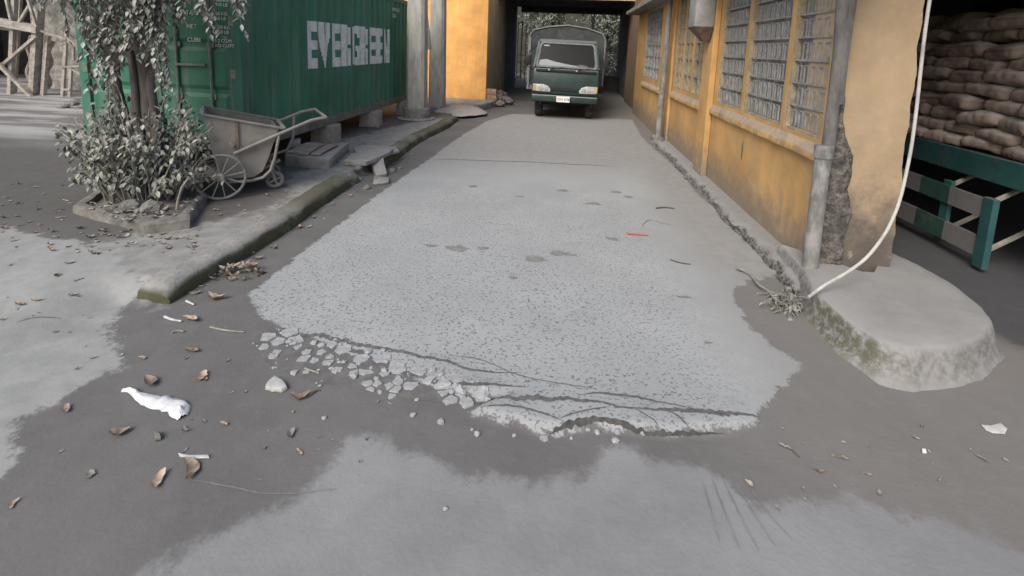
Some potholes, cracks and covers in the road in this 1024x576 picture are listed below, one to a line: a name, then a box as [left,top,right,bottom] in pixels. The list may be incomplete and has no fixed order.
crack [276,325,759,436]
